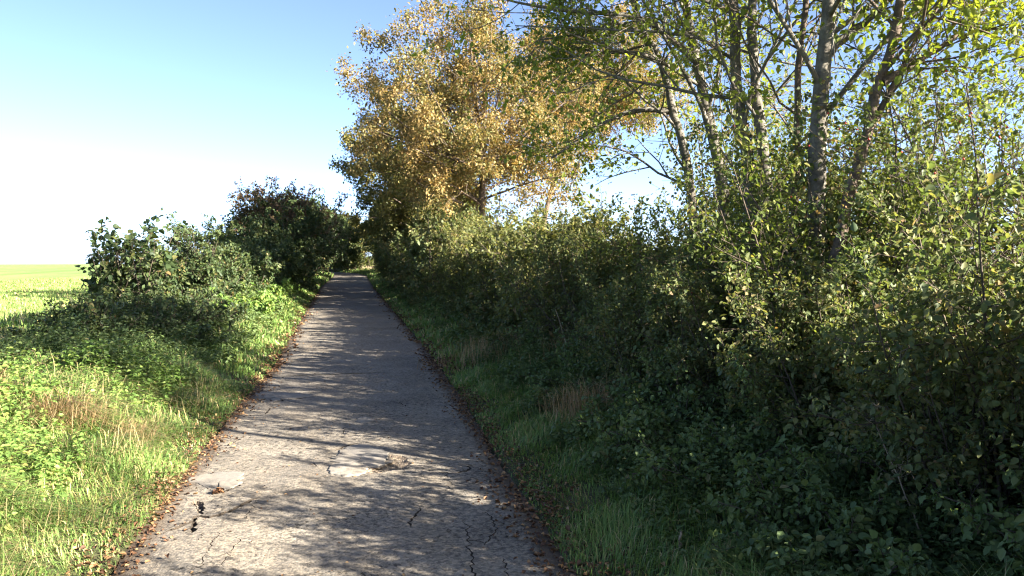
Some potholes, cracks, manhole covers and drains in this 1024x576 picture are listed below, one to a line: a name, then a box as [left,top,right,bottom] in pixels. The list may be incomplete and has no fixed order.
crack [447,510,509,576]
crack [159,483,260,567]
pothole [191,501,206,514]
pothole [366,454,412,474]
